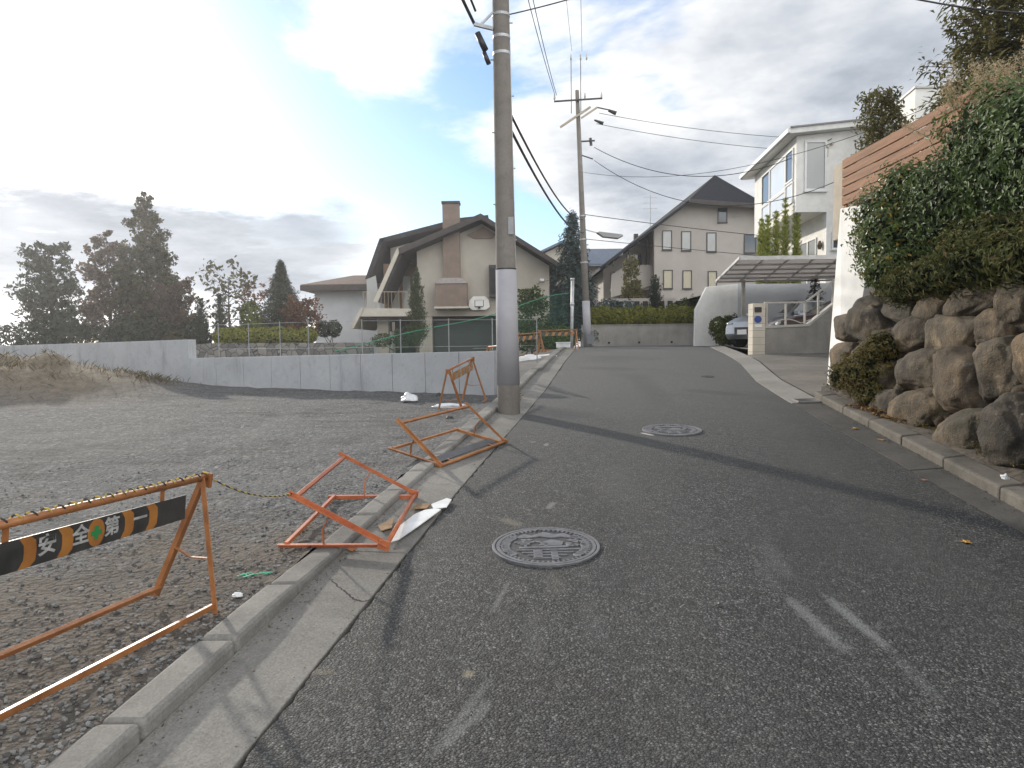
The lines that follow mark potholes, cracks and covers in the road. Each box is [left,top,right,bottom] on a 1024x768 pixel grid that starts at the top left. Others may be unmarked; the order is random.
manhole cover [492,527,600,568]
manhole cover [642,424,702,436]
